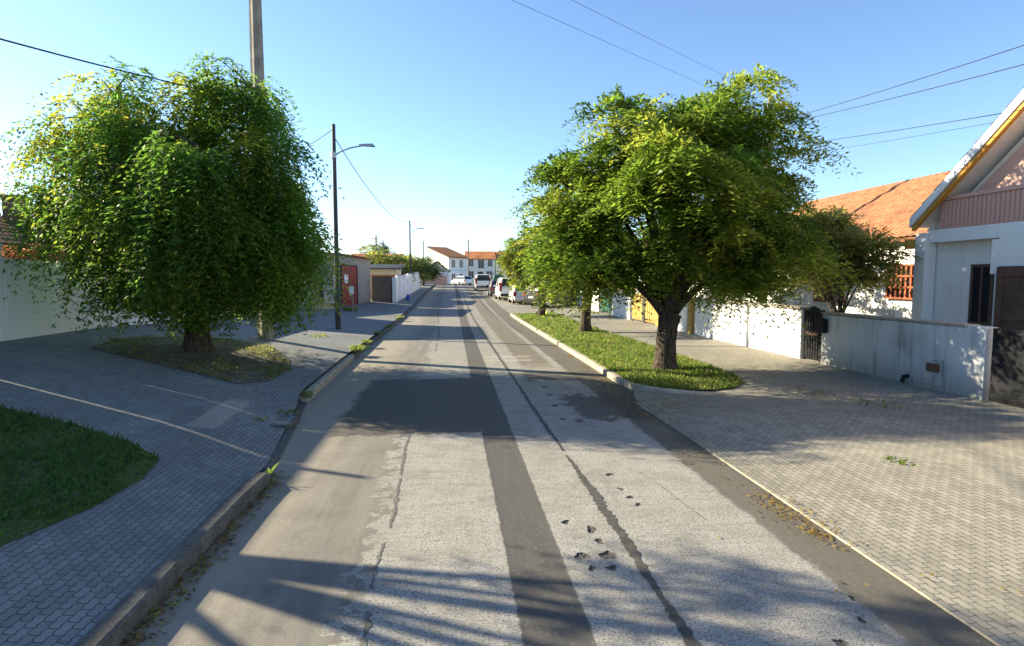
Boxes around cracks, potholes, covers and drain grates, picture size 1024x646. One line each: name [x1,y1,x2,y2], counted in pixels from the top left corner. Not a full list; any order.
pothole [598,550,617,559]
crack [358,434,410,646]
